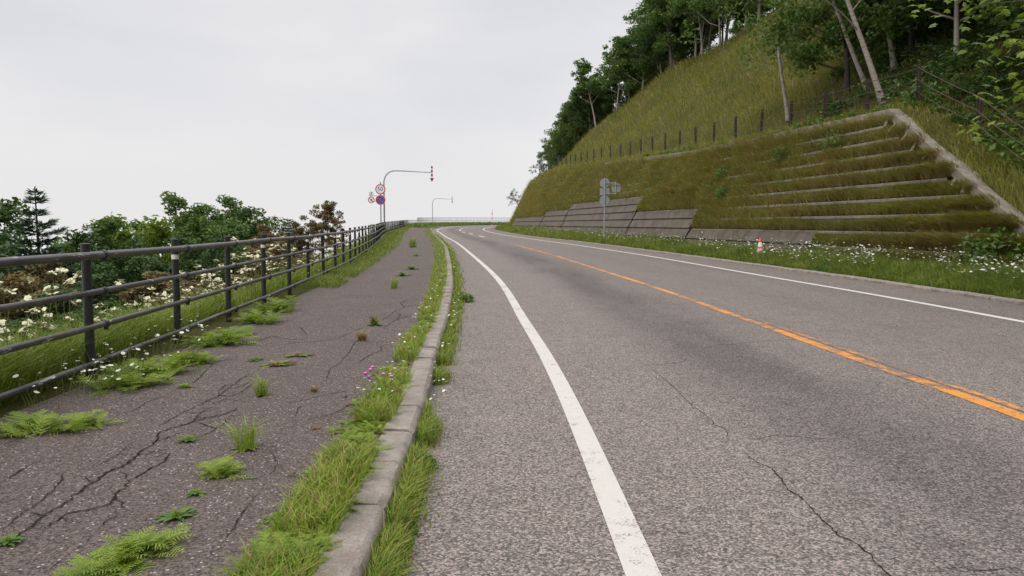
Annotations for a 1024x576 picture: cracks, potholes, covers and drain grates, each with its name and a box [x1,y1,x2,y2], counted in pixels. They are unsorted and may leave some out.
crack [257,326,363,420]
crack [748,434,891,576]
crack [3,364,253,569]
